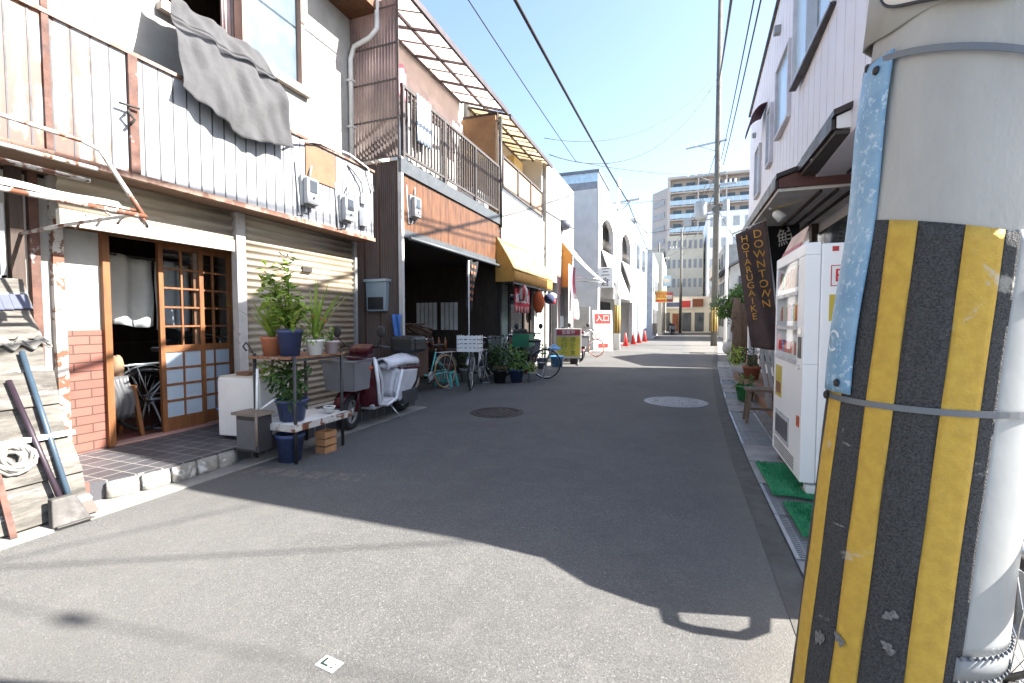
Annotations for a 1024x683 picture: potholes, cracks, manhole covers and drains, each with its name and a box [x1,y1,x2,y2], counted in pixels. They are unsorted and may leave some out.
manhole cover [644,397,709,408]
drain grate [736,431,772,446]
drain grate [732,420,768,434]
drain grate [774,514,808,563]
drain grate [729,411,761,422]
manhole cover [470,407,524,418]
